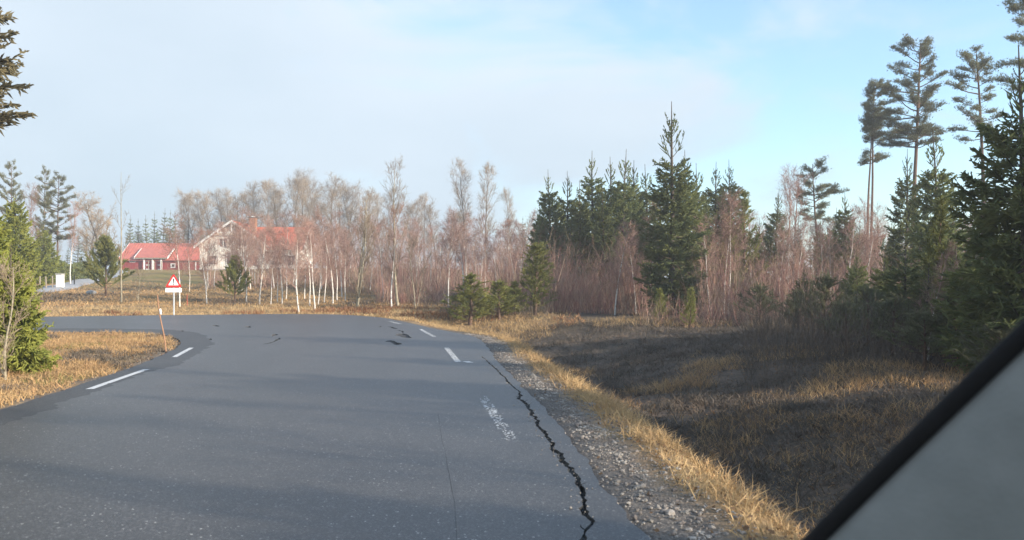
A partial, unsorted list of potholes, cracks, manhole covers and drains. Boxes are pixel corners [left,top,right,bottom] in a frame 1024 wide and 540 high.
crack [482,357,595,540]
